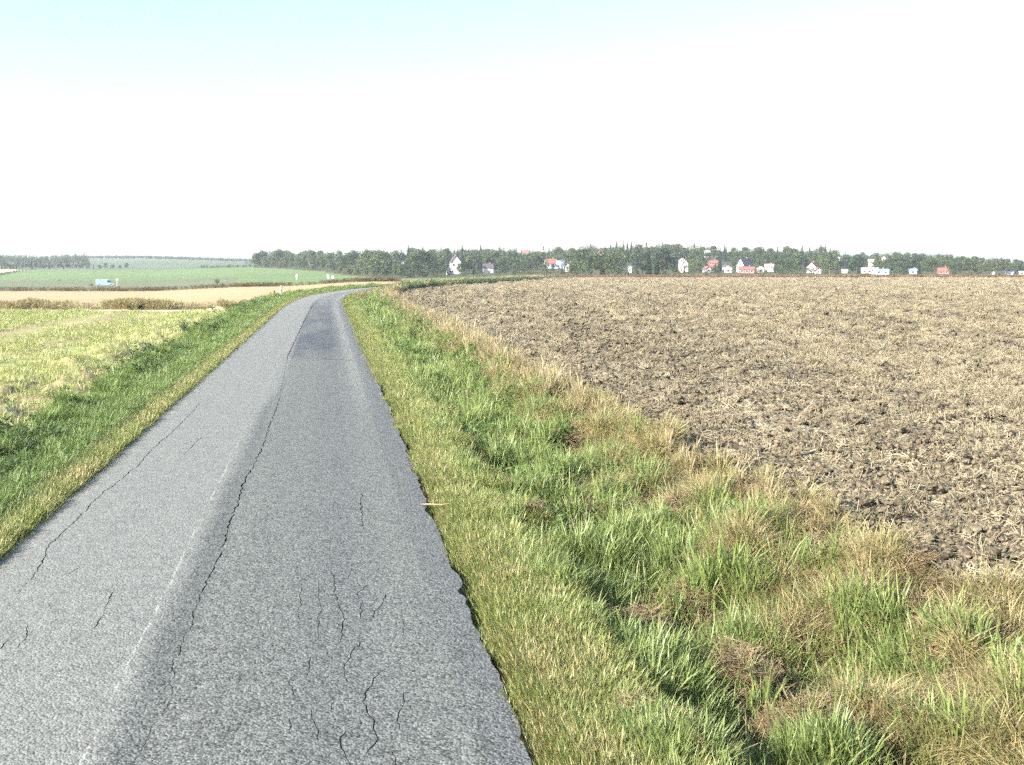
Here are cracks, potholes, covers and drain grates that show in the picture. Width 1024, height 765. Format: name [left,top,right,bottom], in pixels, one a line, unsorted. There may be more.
crack [12,404,202,596]
